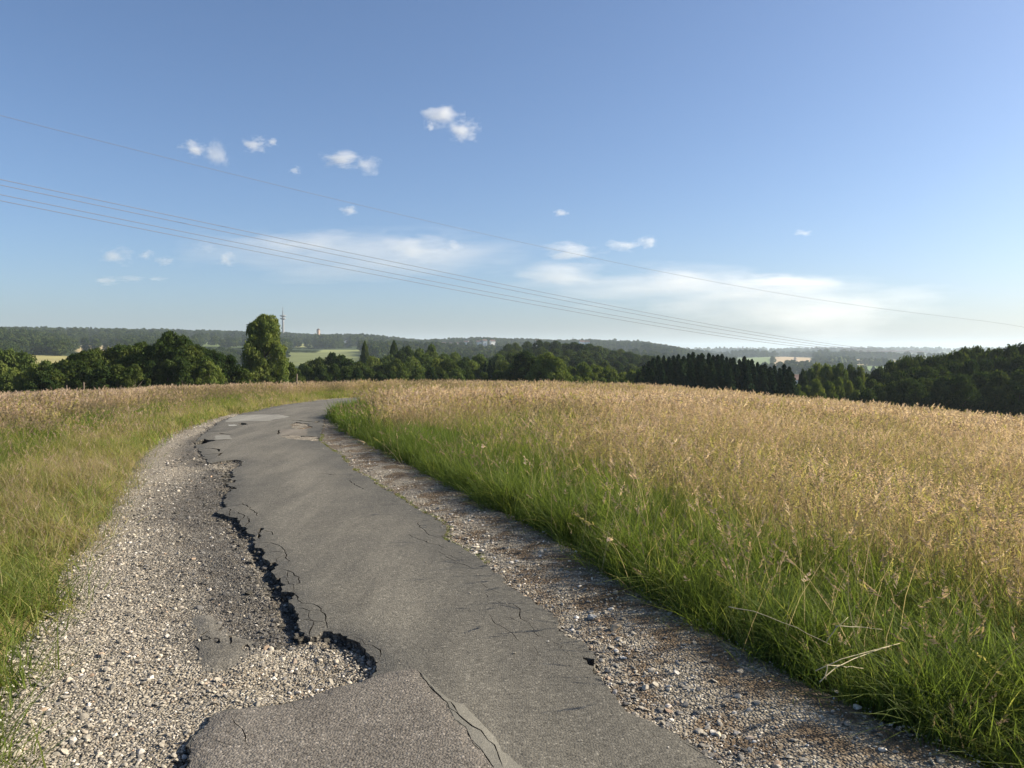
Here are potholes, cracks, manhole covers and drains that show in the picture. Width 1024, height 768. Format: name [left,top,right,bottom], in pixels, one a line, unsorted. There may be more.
pothole [226,631,378,707]
crack [418,671,502,767]
crack [229,503,328,635]
